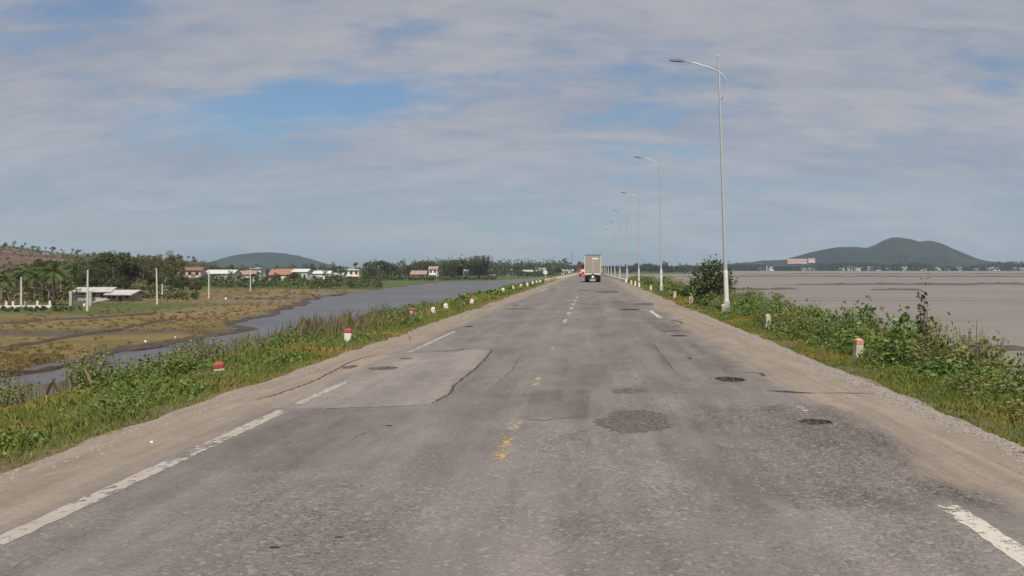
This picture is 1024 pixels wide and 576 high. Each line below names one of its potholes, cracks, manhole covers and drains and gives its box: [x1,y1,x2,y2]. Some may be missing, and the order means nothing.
crack [257,349,520,409]
crack [728,361,876,394]
